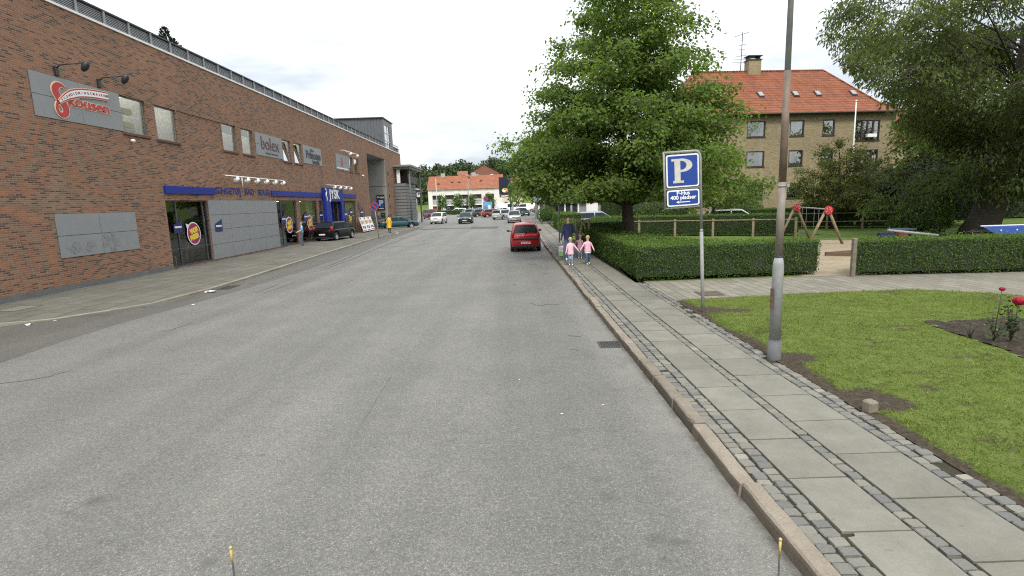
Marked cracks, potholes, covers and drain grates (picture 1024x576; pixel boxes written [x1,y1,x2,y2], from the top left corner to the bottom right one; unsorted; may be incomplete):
crack [356,378,390,434]
